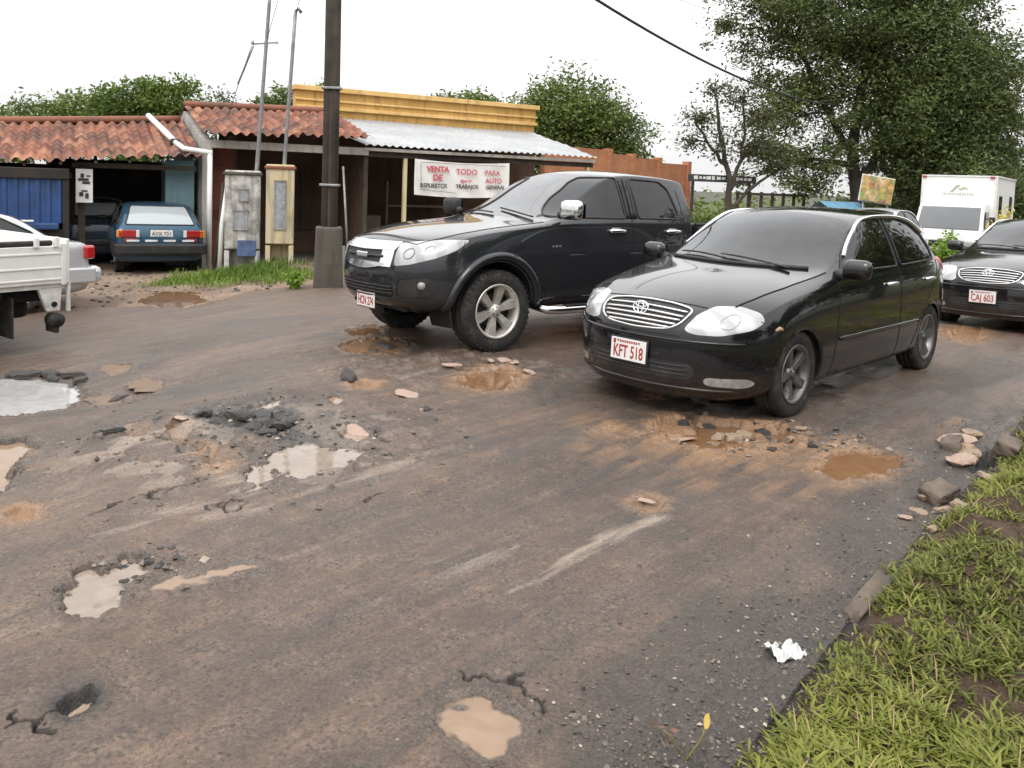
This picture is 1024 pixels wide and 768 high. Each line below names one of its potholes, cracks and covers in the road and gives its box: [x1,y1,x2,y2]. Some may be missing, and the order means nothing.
pothole [120,556,276,600]
pothole [184,406,306,442]
pothole [134,289,213,308]
pothole [416,682,548,768]
pothole [622,490,672,514]
pothole [246,394,291,413]
pothole [449,363,529,394]
crack [3,708,58,735]
pothole [0,376,100,418]
pothole [85,361,139,377]
pothole [156,415,205,447]
pothole [123,373,174,395]
